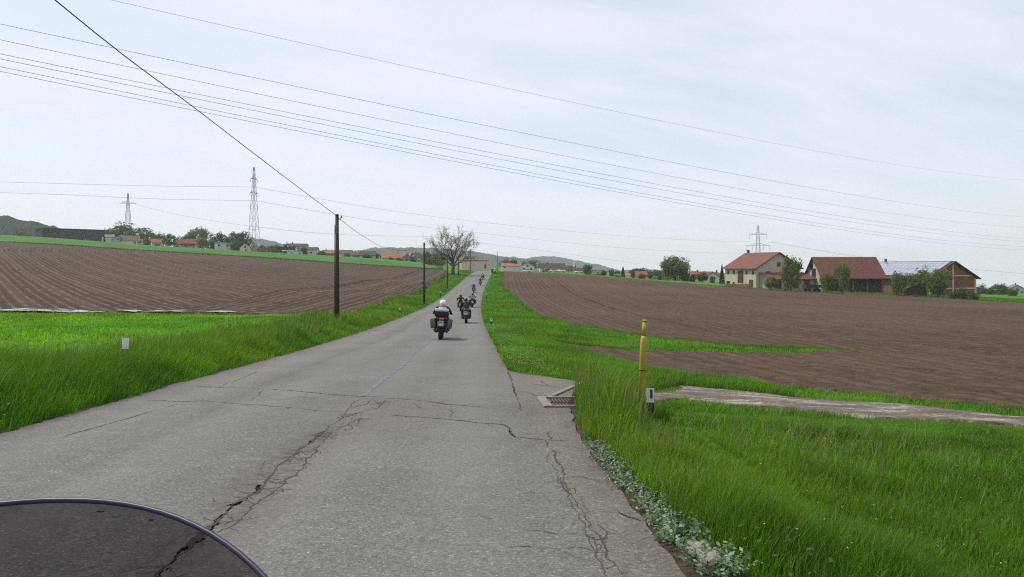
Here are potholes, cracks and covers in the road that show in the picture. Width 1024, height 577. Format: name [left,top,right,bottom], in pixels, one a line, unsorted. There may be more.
crack [469,431,639,577]
crack [158,370,561,533]
